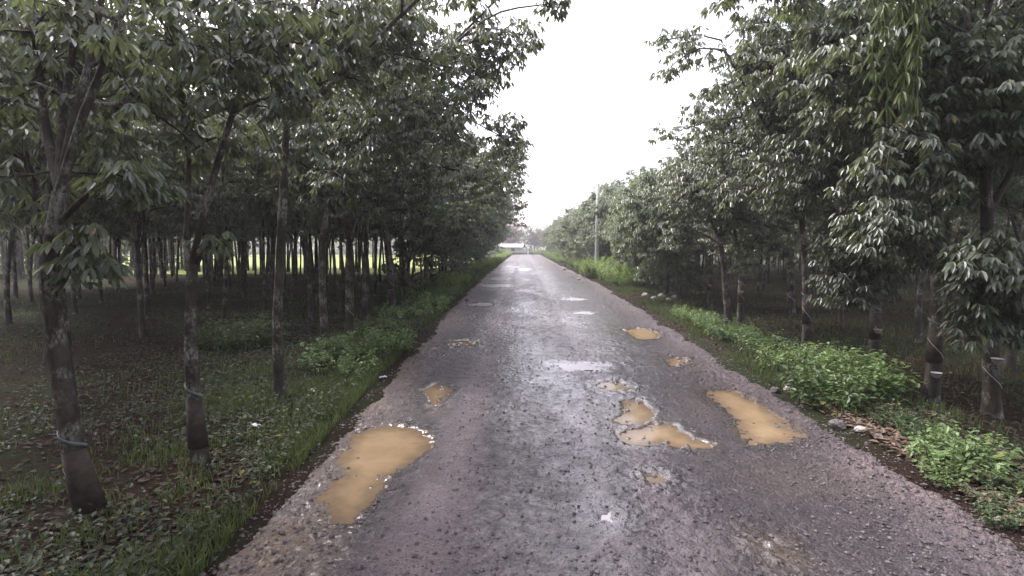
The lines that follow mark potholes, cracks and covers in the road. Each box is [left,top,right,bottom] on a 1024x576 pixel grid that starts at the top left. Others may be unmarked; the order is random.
pothole [692,386,823,451]
pothole [294,418,449,533]
pothole [411,380,463,412]
pothole [602,395,668,427]
pothole [617,327,670,340]
pothole [585,377,645,394]
pothole [602,418,729,456]
pothole [657,354,701,369]
pothole [629,465,685,491]
pothole [445,337,490,347]
